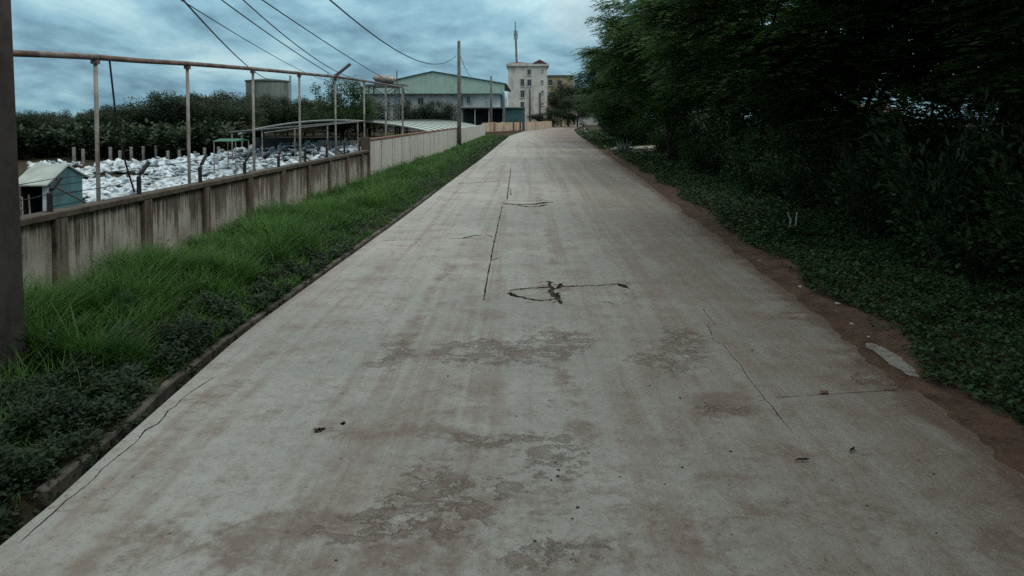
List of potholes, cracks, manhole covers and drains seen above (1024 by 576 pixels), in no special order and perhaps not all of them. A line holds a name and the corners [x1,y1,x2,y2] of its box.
crack [19,377,214,543]
crack [703,309,793,433]
